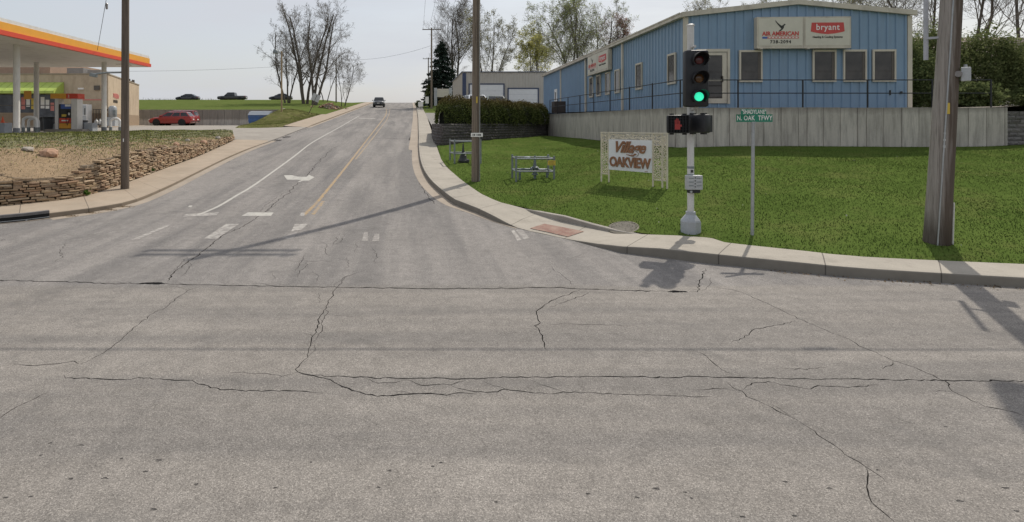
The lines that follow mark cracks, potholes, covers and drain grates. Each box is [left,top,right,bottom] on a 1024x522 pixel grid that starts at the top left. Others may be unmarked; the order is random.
manhole cover [608,221,639,234]
crack [19,147,1023,520]
